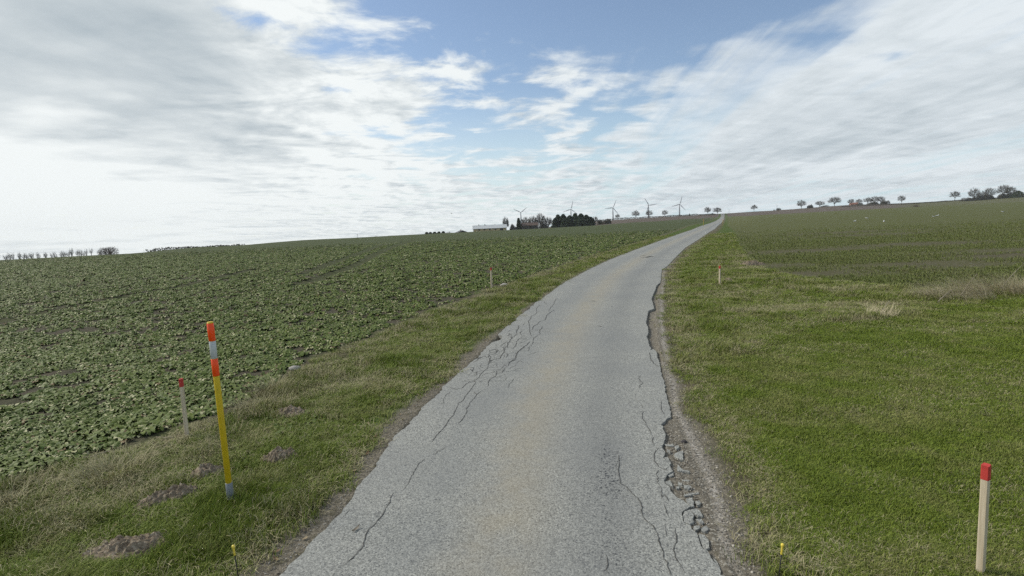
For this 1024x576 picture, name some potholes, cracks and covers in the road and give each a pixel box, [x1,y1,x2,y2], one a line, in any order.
pothole [663,416,738,576]
crack [615,352,685,576]
crack [333,445,447,575]
crack [433,304,554,440]
